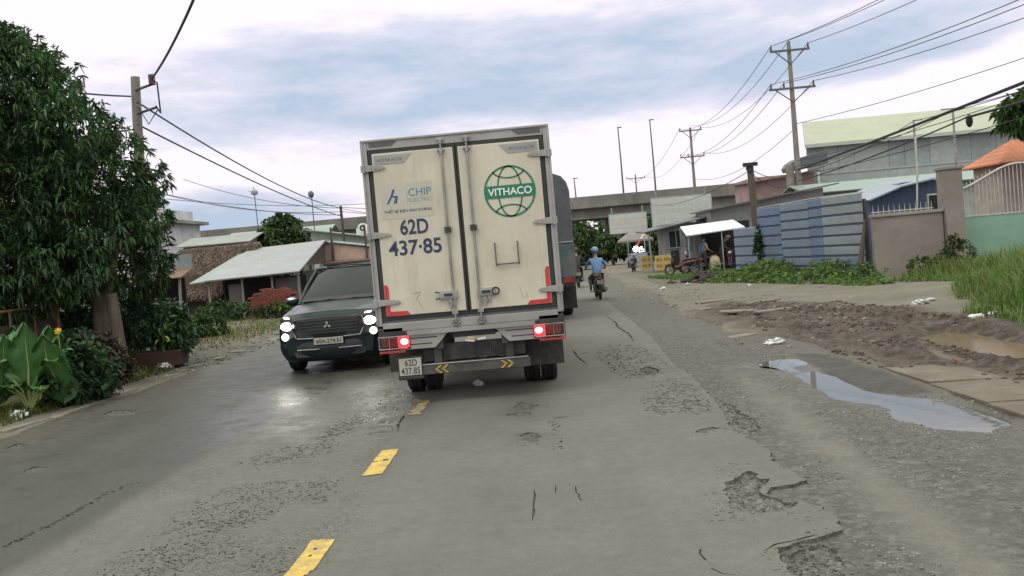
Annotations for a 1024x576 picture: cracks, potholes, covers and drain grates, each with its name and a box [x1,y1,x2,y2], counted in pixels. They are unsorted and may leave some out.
pothole [628,365,666,375]
pothole [713,400,777,440]
crack [231,391,410,470]
pothole [519,430,544,446]
pothole [513,400,549,410]
pothole [705,463,821,528]
crack [3,482,140,548]
pothole [759,528,870,576]
crack [572,316,717,416]
pothole [23,466,48,474]
